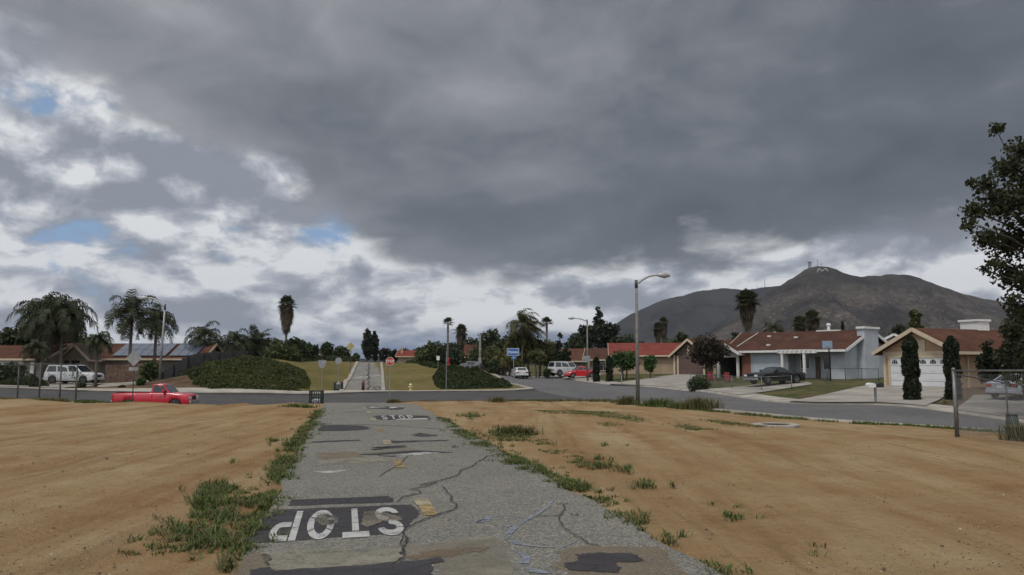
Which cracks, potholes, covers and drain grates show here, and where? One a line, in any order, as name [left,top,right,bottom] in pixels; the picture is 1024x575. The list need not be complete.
crack [533,502,601,547]
crack [379,455,492,570]
